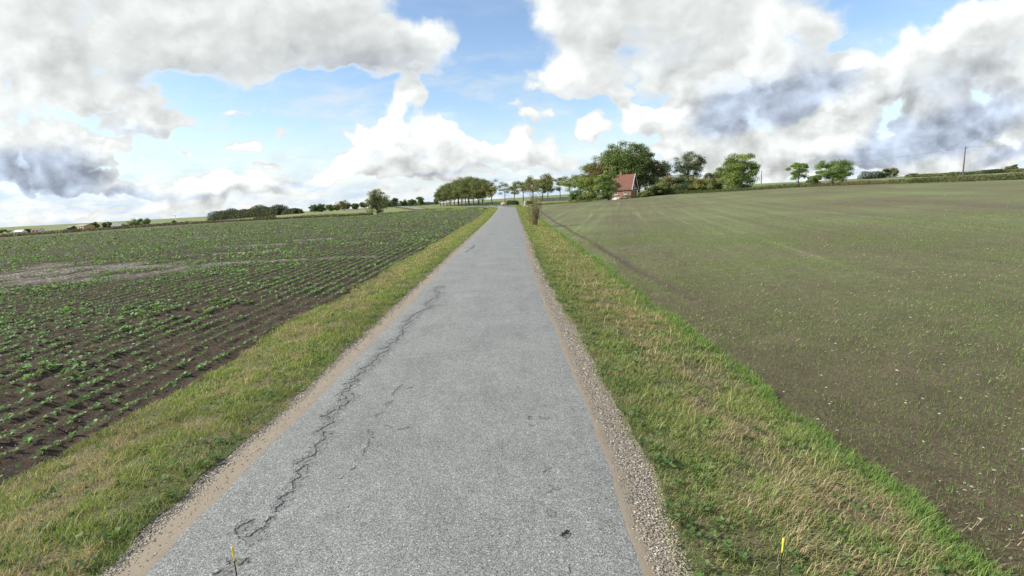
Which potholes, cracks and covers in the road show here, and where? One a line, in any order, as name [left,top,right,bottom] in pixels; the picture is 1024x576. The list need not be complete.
crack [212,285,447,576]
